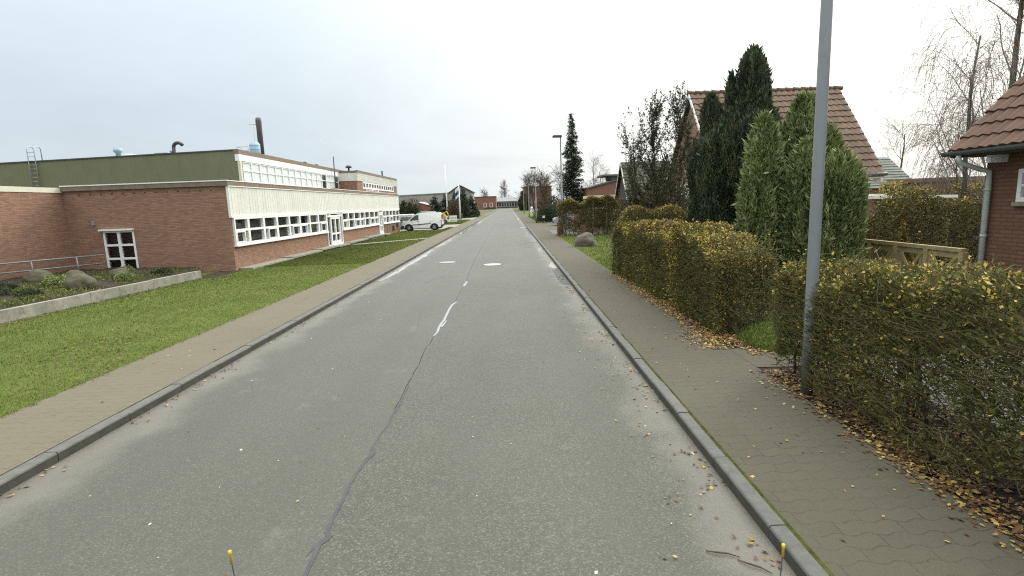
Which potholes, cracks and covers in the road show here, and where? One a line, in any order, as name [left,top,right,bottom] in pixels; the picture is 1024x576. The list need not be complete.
crack [303,216,535,576]
